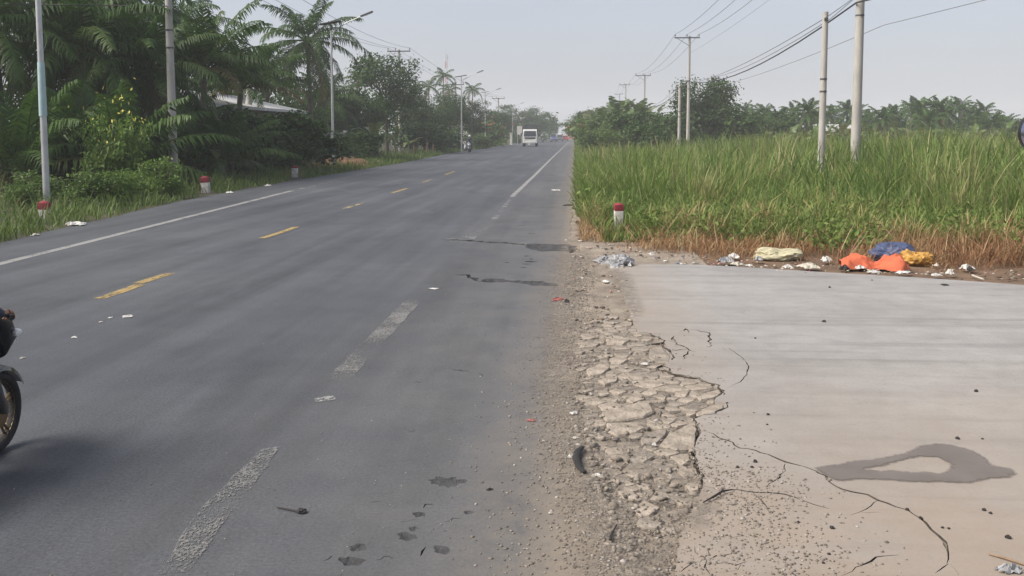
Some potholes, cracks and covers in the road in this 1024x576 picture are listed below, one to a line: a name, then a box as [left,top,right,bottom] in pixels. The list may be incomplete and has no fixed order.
crack [641,326,959,575]
